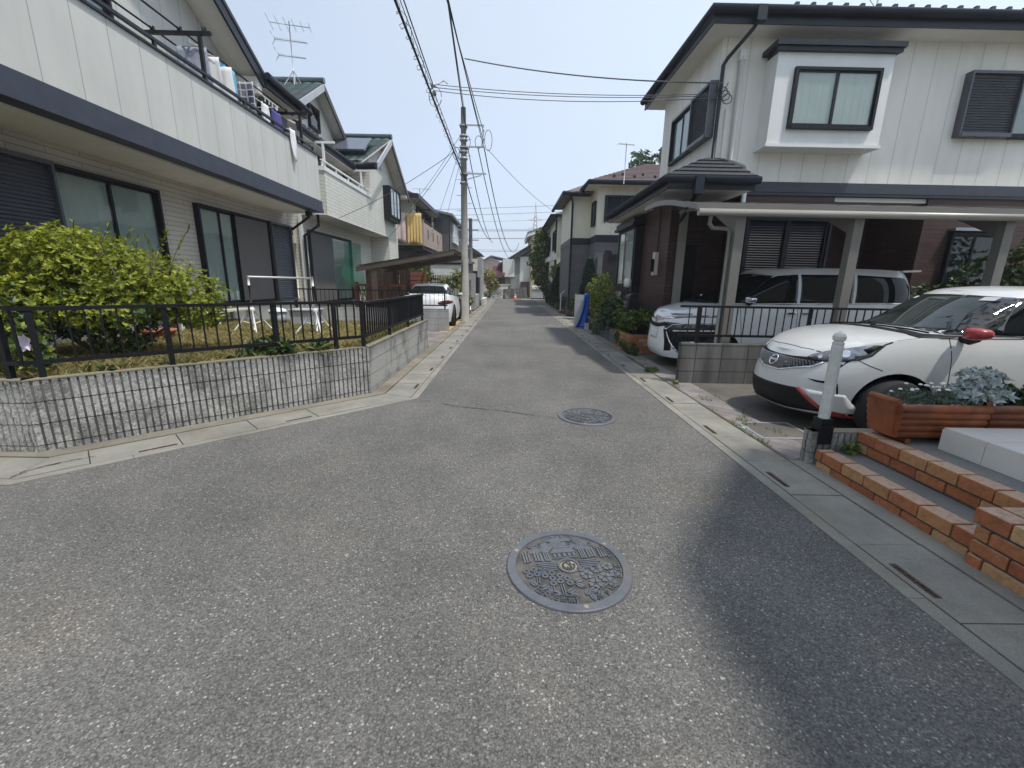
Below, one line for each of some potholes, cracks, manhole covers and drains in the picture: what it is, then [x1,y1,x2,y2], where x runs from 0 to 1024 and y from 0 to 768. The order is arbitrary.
manhole cover [507,530,633,614]
manhole cover [557,407,617,426]
drain grate [892,565,940,598]
utility cover [736,422,804,440]
